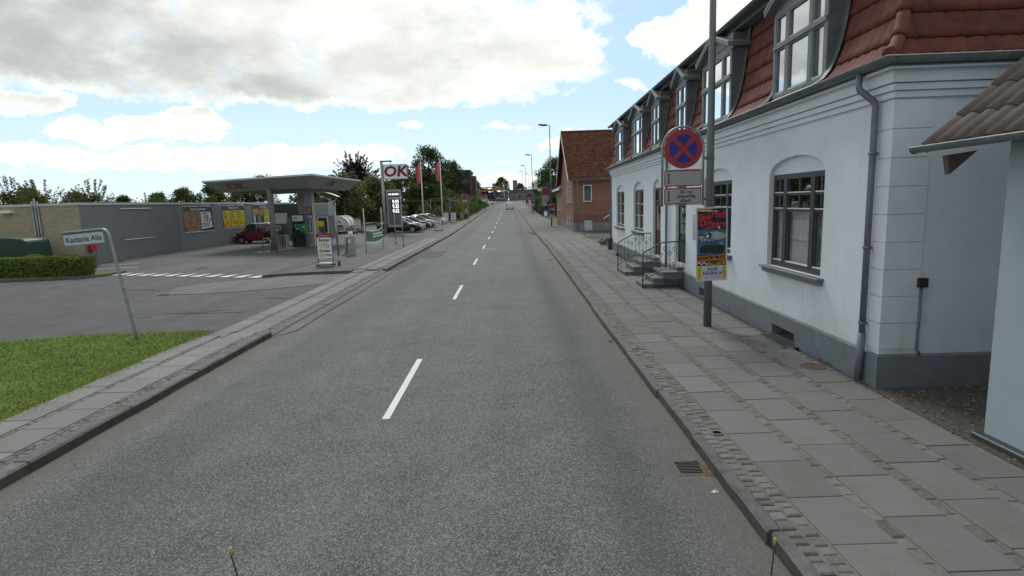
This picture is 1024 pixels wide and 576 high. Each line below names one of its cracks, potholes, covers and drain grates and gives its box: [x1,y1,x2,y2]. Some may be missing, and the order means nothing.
drain grate [670,460,711,476]
